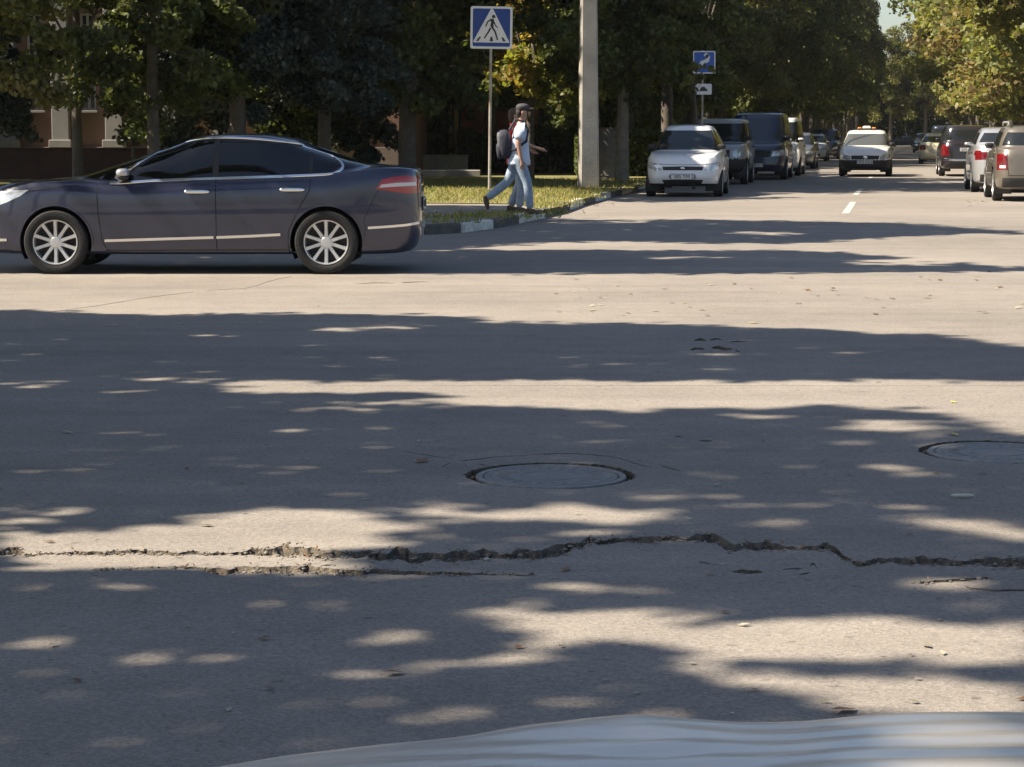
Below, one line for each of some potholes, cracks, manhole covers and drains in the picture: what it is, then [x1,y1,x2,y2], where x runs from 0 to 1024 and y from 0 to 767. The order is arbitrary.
pothole [691,338,748,352]
crack [403,451,681,471]
manhole cover [917,440,1024,464]
crack [0,531,1024,592]
manhole cover [462,462,636,489]
